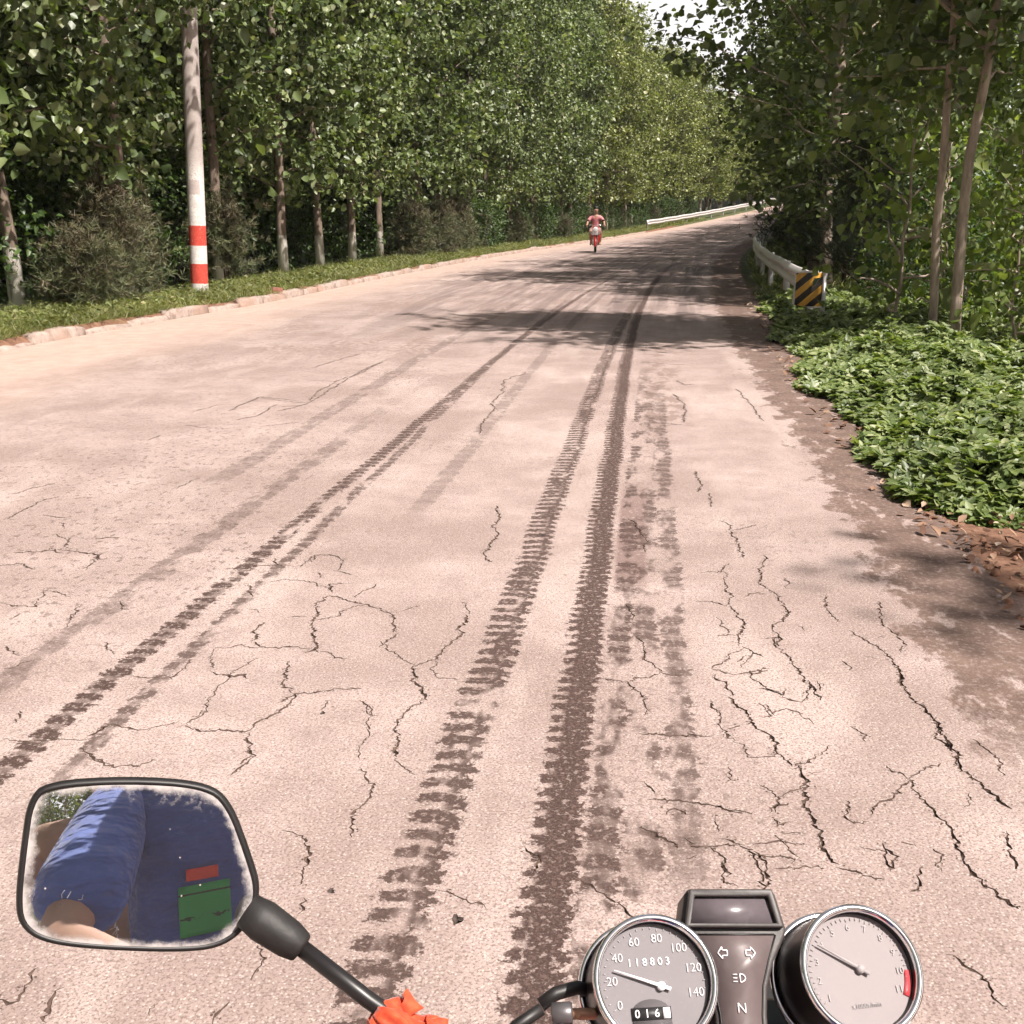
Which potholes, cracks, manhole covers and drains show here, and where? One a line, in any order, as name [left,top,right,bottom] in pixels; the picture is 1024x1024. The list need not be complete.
crack [0,482,121,722]
crack [476,374,524,434]
crack [178,353,385,487]
crack [636,522,1020,909]
crack [481,506,504,562]
crack [9,553,470,837]
crack [946,950,1007,1009]
